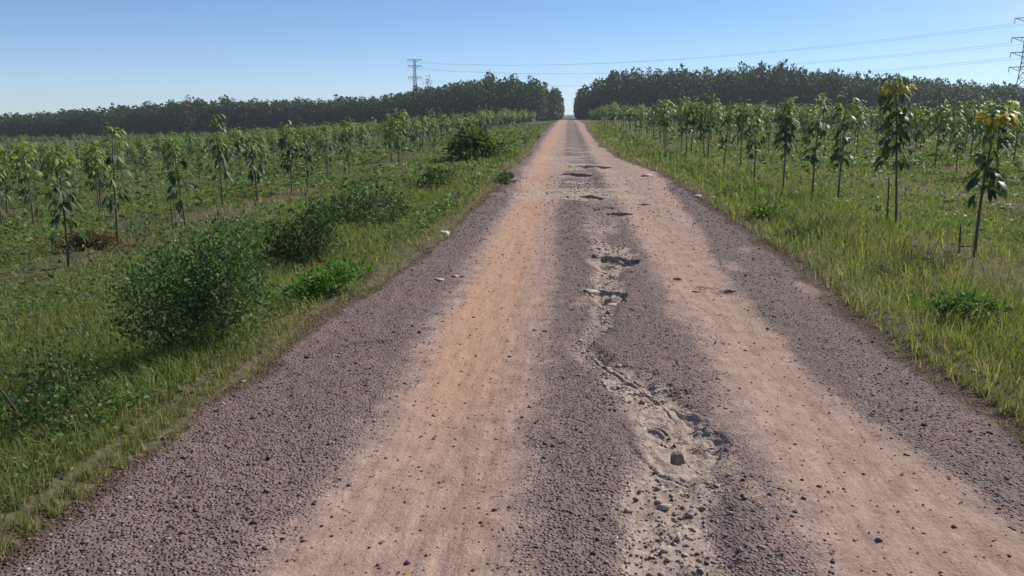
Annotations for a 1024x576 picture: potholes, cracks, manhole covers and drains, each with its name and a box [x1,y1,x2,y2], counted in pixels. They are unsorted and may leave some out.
pothole [577,287,633,309]
pothole [552,194,610,203]
pothole [622,403,739,487]
pothole [577,253,646,274]
